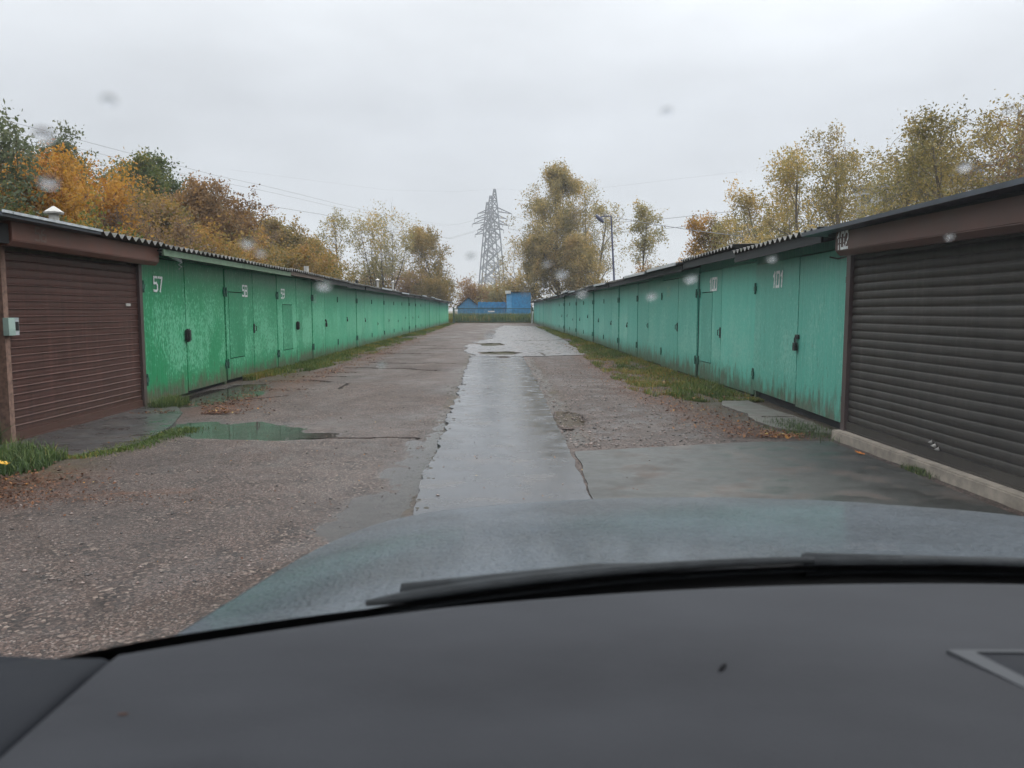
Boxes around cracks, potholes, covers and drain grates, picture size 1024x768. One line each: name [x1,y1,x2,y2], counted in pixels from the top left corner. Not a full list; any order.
pothole [553,411,589,429]
